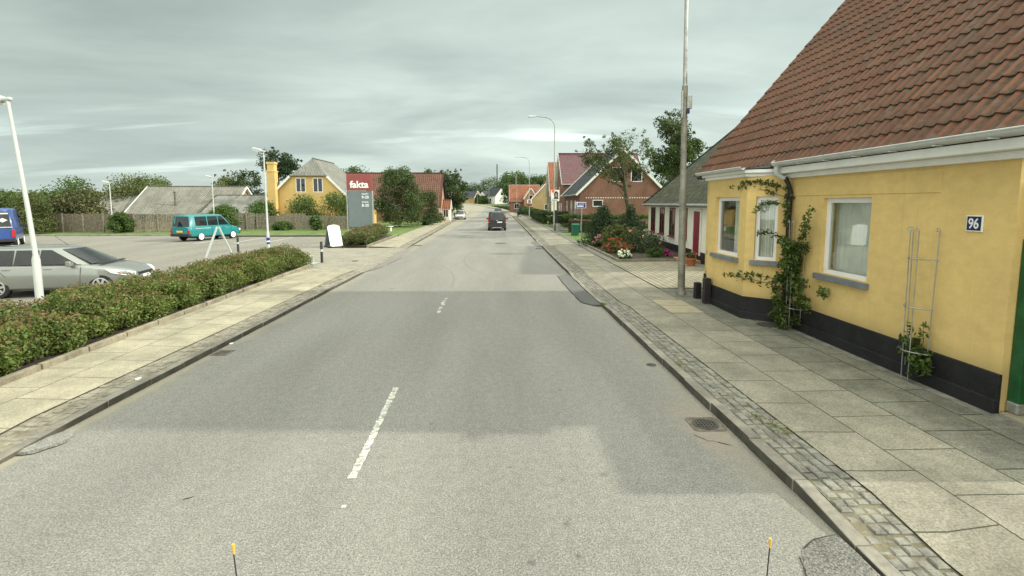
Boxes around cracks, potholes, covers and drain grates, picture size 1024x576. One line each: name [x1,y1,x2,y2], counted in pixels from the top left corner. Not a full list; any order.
drain grate [685,417,727,432]
